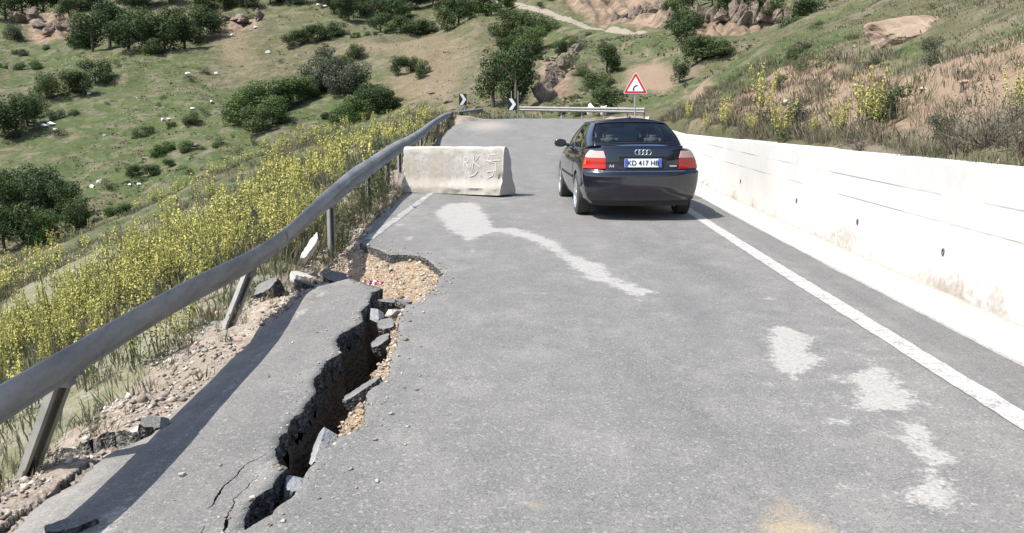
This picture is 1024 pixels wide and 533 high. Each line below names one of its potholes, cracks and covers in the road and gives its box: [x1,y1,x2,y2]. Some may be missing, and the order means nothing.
pothole [315,250,440,319]
crack [207,304,402,532]
